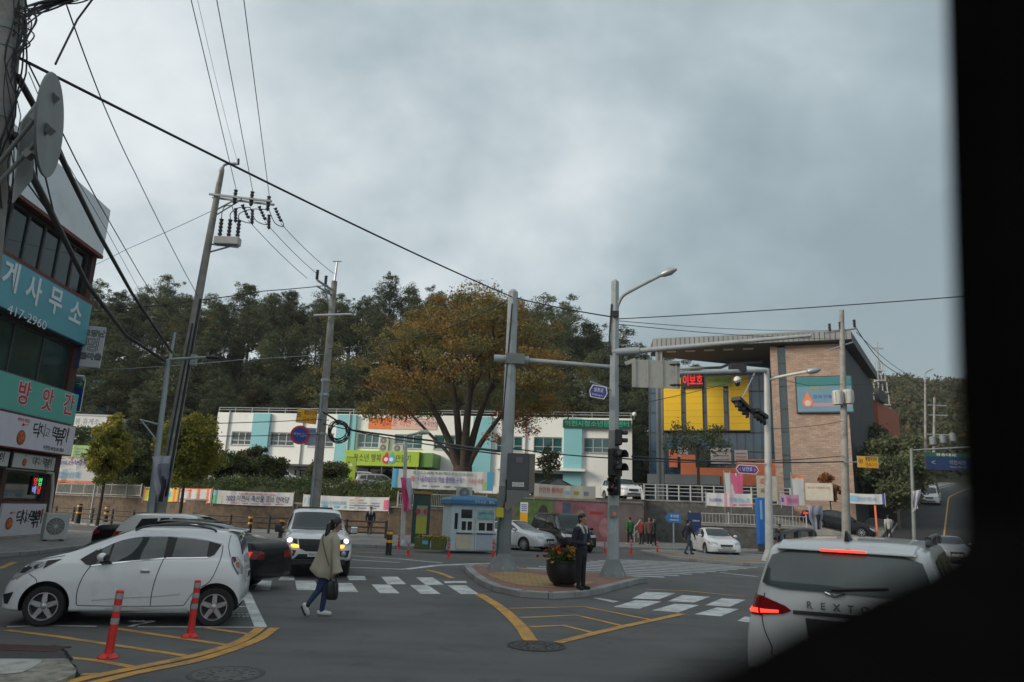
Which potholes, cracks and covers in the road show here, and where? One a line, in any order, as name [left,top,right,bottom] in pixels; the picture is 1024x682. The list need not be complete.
manhole cover [510,641,563,651]
manhole cover [186,666,265,682]
